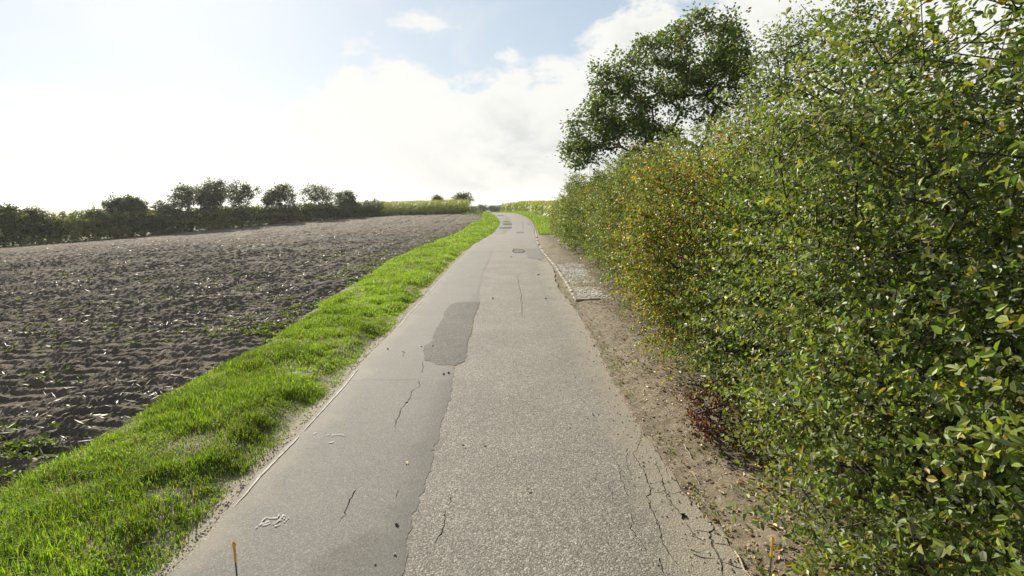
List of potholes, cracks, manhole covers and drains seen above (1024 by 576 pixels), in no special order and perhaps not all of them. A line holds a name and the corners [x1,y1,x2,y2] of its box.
crack [608,432,746,576]
